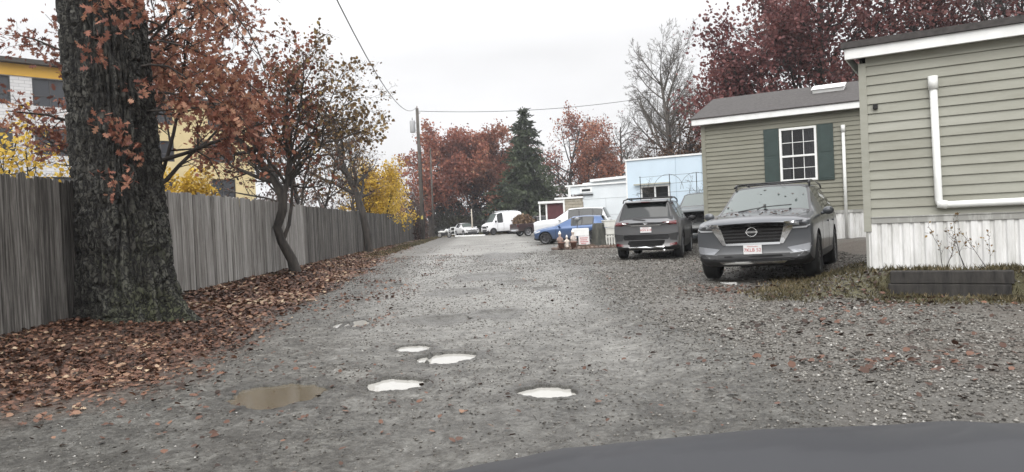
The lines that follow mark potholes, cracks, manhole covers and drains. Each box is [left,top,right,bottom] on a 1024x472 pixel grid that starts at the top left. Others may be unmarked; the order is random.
pothole [338,318,374,328]
pothole [503,382,588,401]
pothole [350,374,440,395]
pothole [389,342,438,354]
pothole [403,349,487,367]
pothole [203,378,348,415]
